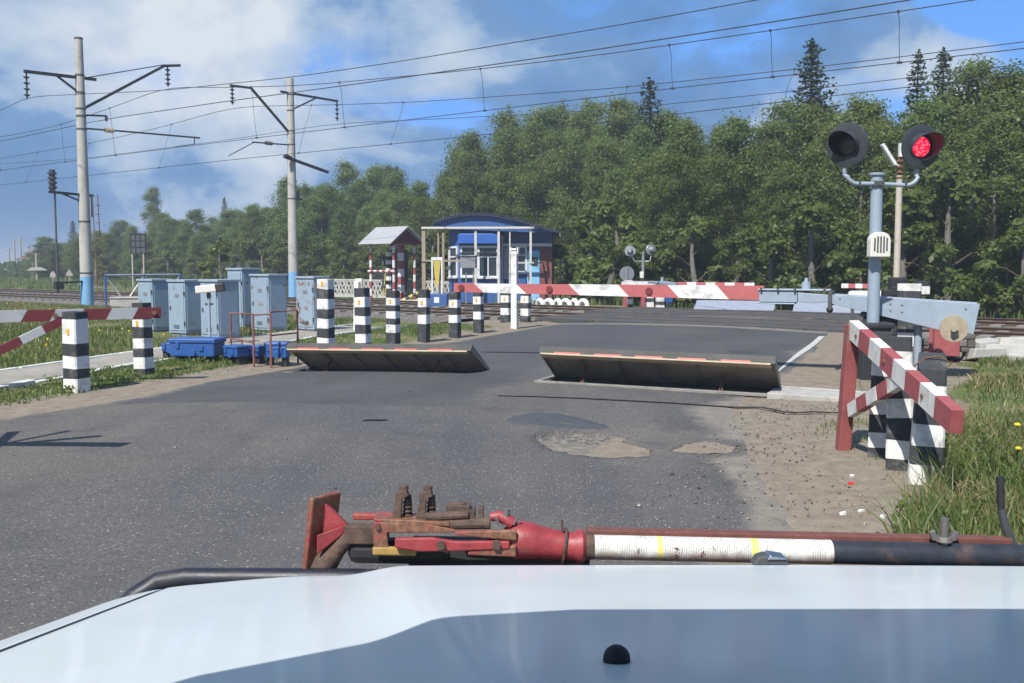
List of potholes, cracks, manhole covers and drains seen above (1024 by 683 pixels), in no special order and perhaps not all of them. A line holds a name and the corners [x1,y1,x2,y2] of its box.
pothole [668,440,737,454]
pothole [529,429,653,458]
